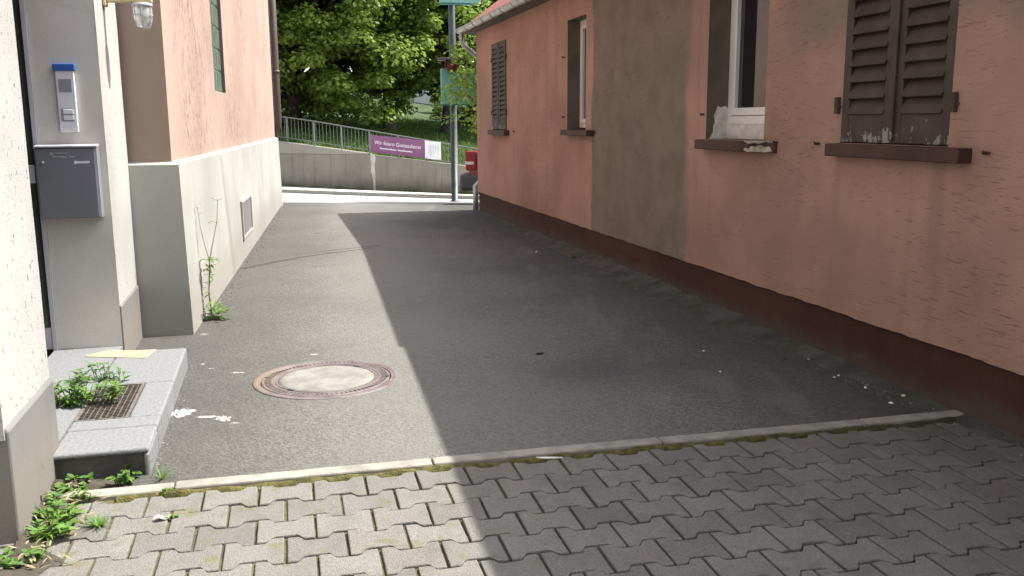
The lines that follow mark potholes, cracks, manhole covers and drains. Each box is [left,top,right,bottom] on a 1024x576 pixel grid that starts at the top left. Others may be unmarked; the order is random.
manhole cover [252,360,399,400]
